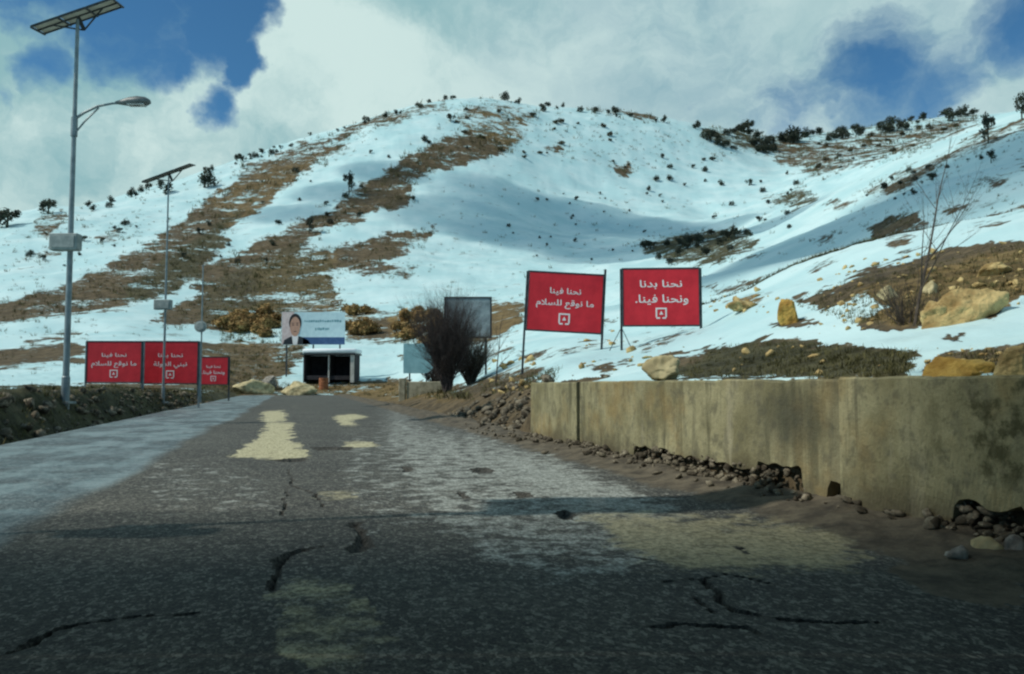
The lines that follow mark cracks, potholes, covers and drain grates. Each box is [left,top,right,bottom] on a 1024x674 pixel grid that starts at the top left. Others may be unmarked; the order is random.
crack [0,611,200,657]
crack [279,469,333,518]
pothole [344,522,377,553]
crack [604,556,887,639]
crack [265,545,337,592]
pothole [553,510,578,521]
